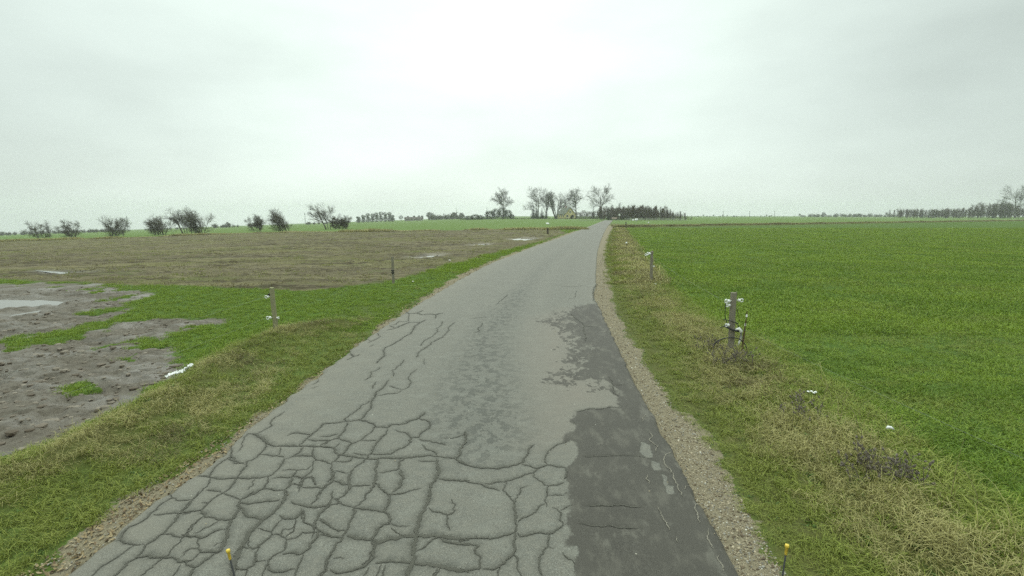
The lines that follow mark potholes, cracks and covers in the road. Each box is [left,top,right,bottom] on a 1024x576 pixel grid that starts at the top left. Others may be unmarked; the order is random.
crack [60,373,634,576]
crack [584,416,724,573]
crack [347,312,453,388]
